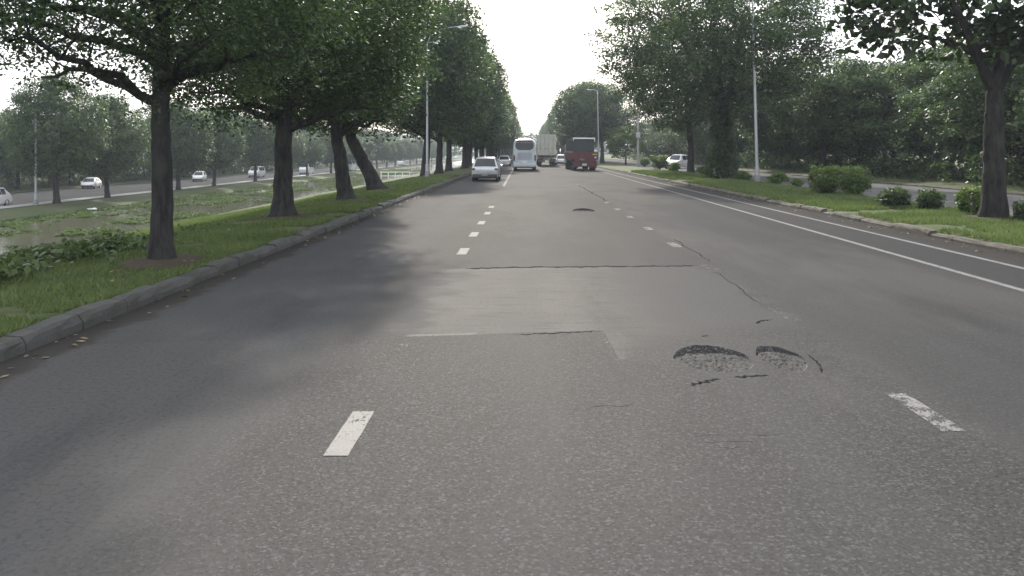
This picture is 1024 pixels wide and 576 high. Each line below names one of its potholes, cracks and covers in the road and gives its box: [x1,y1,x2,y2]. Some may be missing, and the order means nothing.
crack [691,375,768,386]
crack [696,433,784,448]
pothole [756,346,808,372]
pothole [673,345,754,372]
